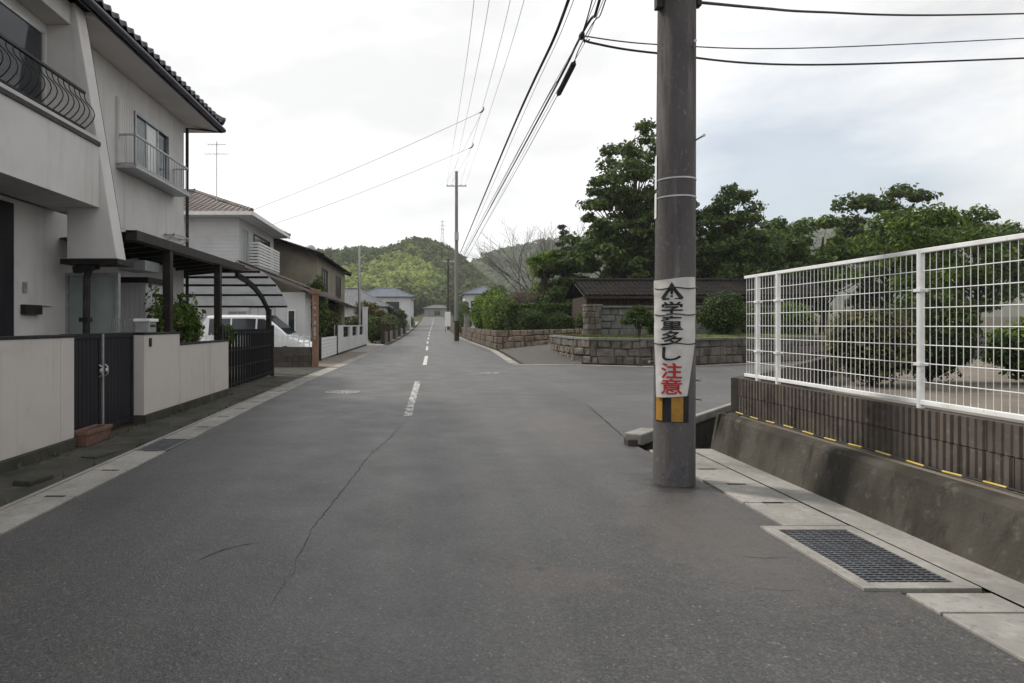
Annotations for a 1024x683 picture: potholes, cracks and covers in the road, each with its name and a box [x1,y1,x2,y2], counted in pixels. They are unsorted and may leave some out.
drain grate [760,526,982,593]
drain grate [135,439,190,452]
